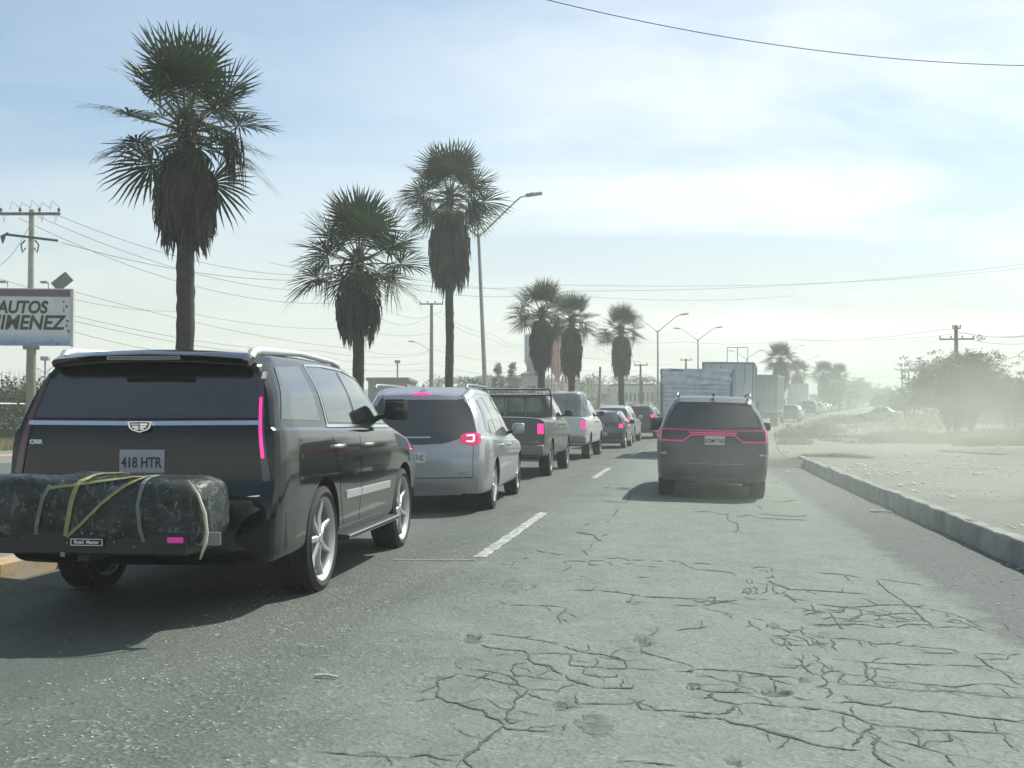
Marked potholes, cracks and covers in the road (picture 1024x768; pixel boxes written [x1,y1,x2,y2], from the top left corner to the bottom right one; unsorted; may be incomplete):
pothole [463,633,483,644]
crack [320,532,1024,767]
crack [695,482,808,532]
